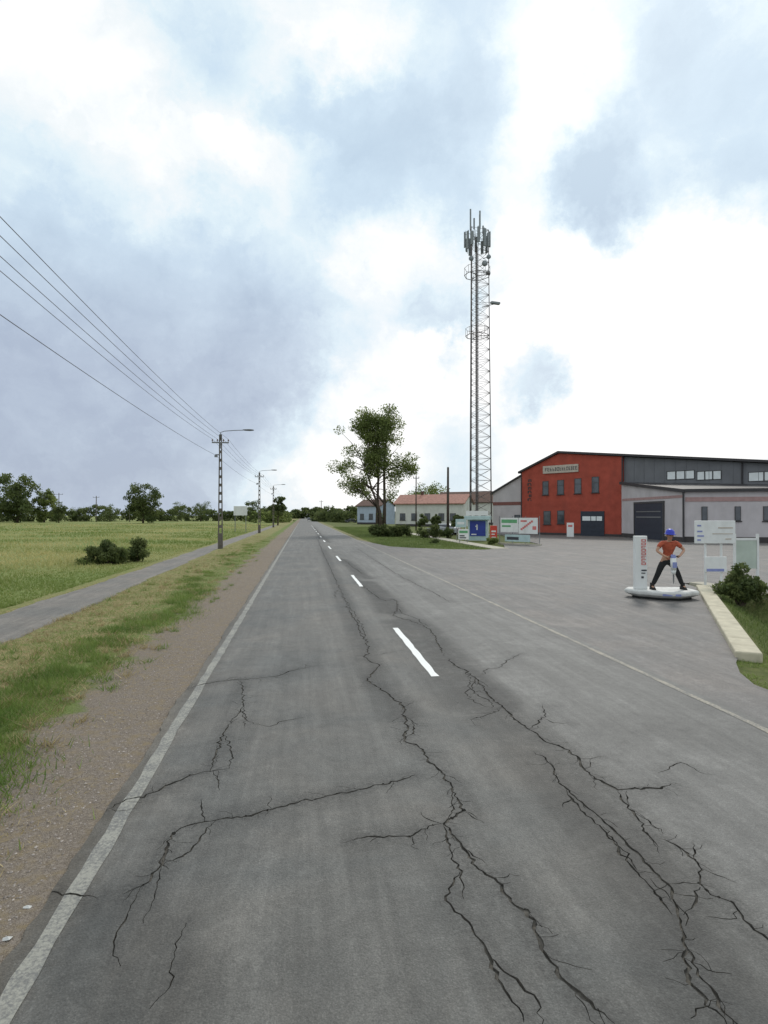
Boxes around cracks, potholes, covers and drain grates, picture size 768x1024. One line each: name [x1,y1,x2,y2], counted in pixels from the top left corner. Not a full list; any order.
crack [52,541,768,1024]
